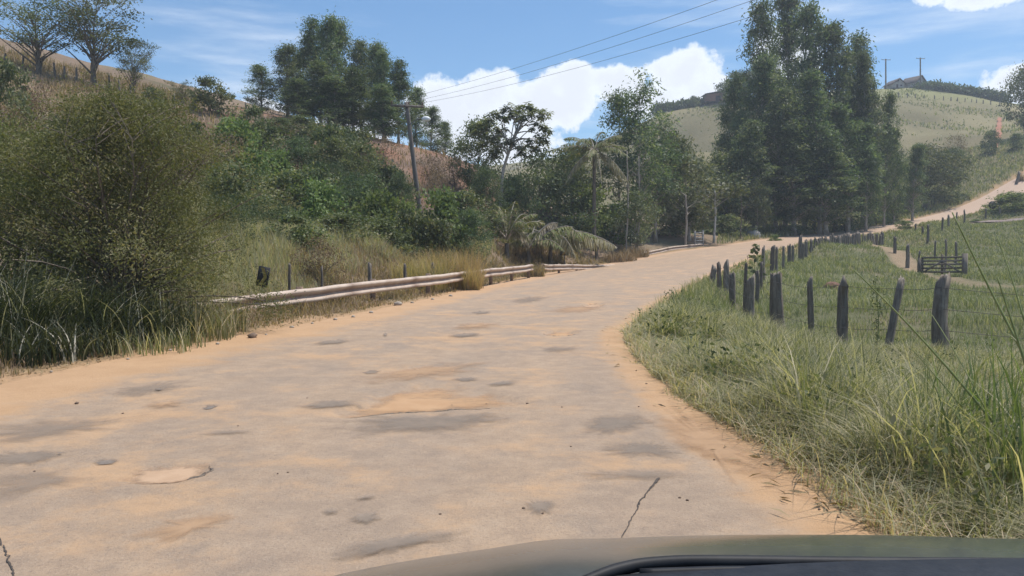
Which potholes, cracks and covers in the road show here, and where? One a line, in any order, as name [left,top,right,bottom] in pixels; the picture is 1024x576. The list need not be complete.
crack [621,477,660,538]
crack [0,538,15,576]
